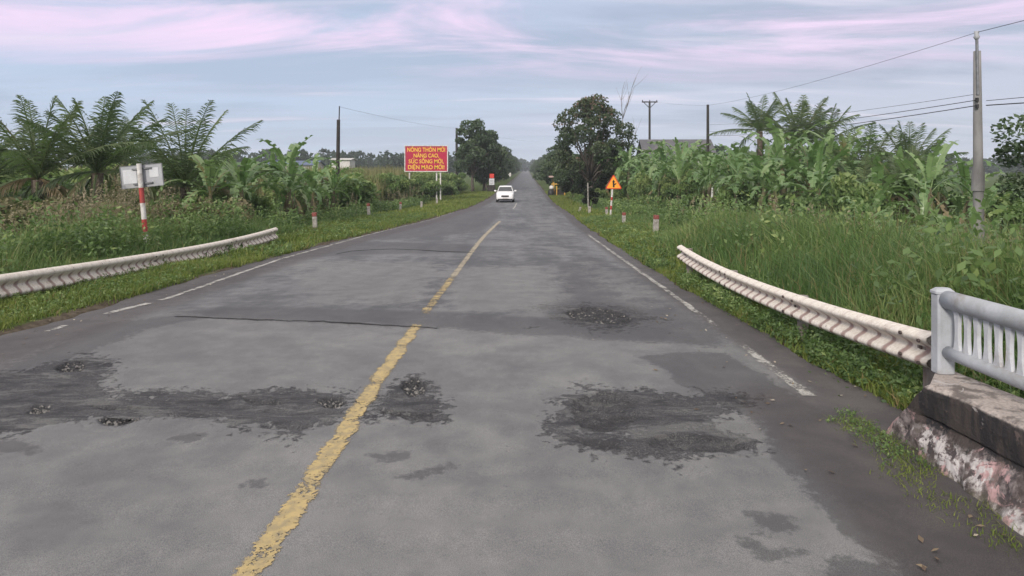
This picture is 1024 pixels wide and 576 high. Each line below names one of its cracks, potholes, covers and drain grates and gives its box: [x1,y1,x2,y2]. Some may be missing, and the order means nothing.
pothole [303,393,360,414]
pothole [556,306,642,327]
